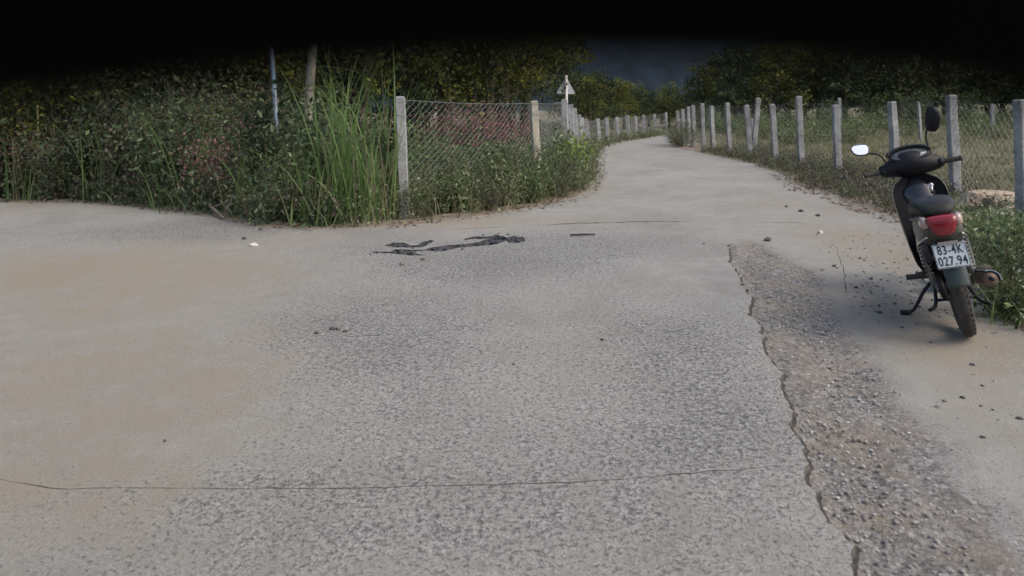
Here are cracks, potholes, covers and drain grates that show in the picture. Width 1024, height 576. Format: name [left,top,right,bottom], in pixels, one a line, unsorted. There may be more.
crack [0,464,800,489]
crack [727,244,862,576]
